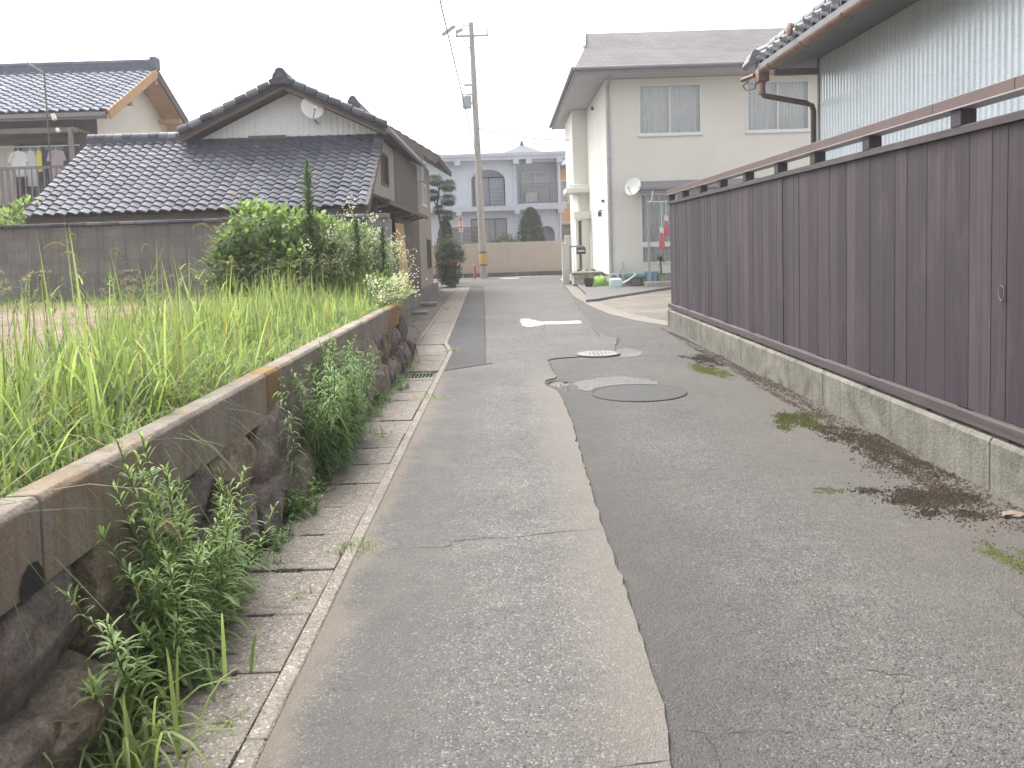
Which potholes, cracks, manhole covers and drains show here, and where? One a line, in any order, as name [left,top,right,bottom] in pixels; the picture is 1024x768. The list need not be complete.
manhole cover [591,384,687,402]
drain grate [399,373,437,381]
crack [848,667,925,717]
crack [395,528,593,549]
pothole [547,380,571,391]
manhole cover [574,350,621,358]
crack [687,729,784,768]
